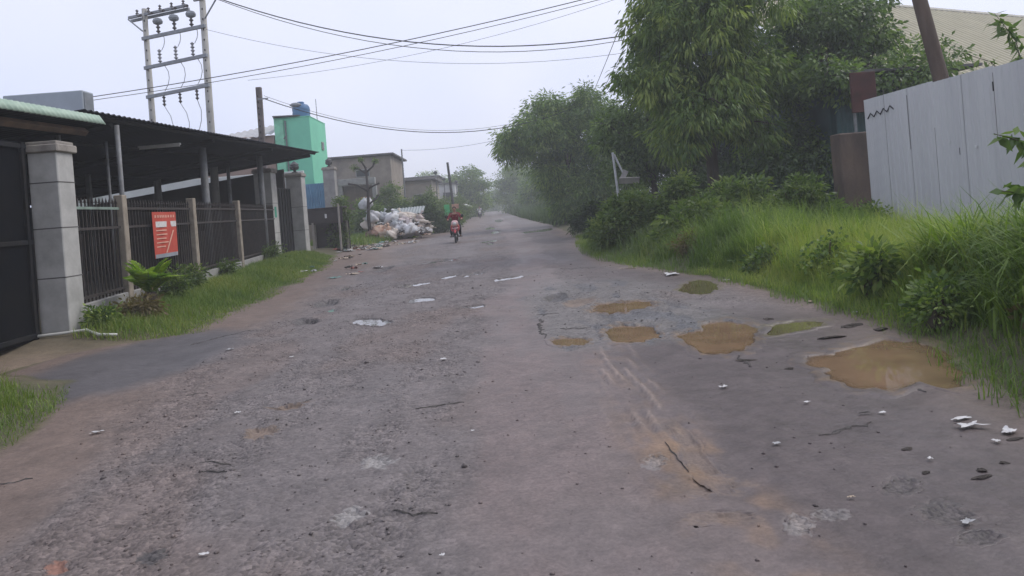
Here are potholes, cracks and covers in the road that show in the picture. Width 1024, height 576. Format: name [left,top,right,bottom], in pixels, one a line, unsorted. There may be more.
pothole [596,321,674,346]
crack [537,313,591,339]
pothole [579,298,668,317]
pothole [753,318,837,338]
pothole [543,335,599,348]
pothole [670,278,727,298]
pothole [785,332,997,399]
pothole [659,316,772,361]
pothole [291,316,324,327]
pothole [241,424,282,443]
